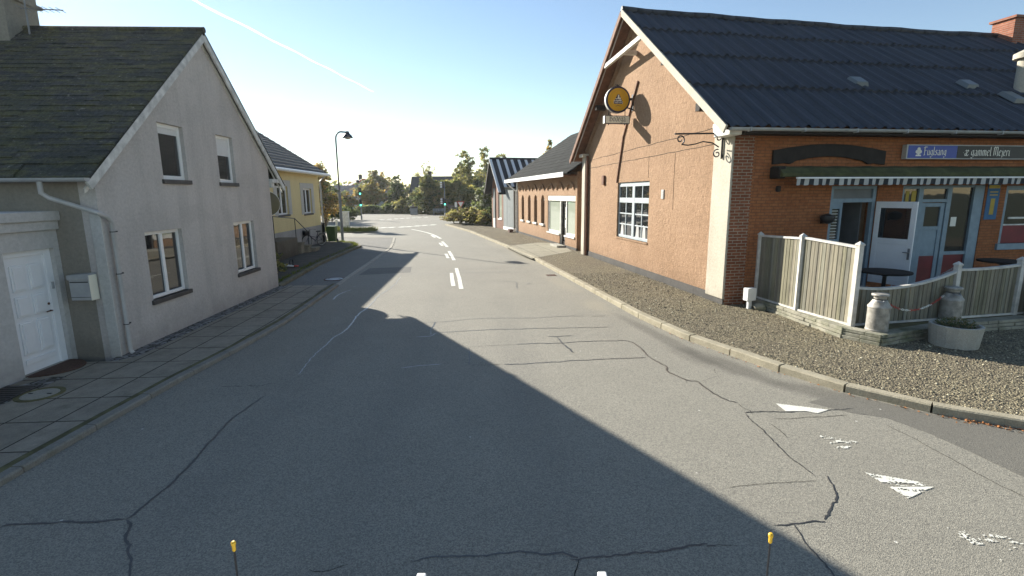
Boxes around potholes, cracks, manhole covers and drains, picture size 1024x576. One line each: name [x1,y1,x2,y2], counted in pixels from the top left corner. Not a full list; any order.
manhole cover [13,386,66,403]
crack [733,404,850,576]
crack [415,543,737,576]
